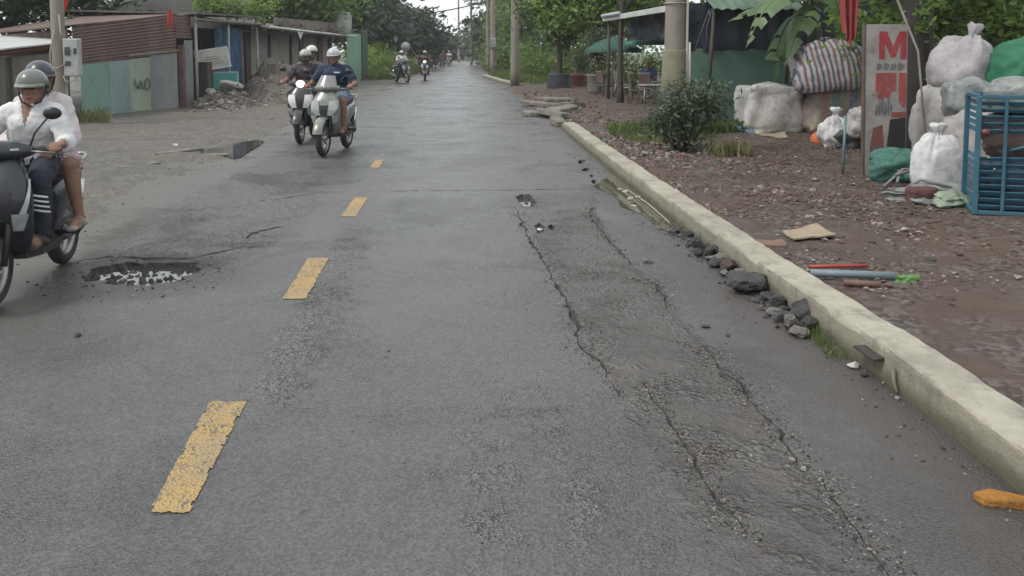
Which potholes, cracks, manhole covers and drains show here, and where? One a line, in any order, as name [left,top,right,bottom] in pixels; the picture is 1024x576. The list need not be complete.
pothole [516,194,537,207]
crack [58,226,283,267]
pothole [81,262,202,286]
crack [514,207,668,397]
